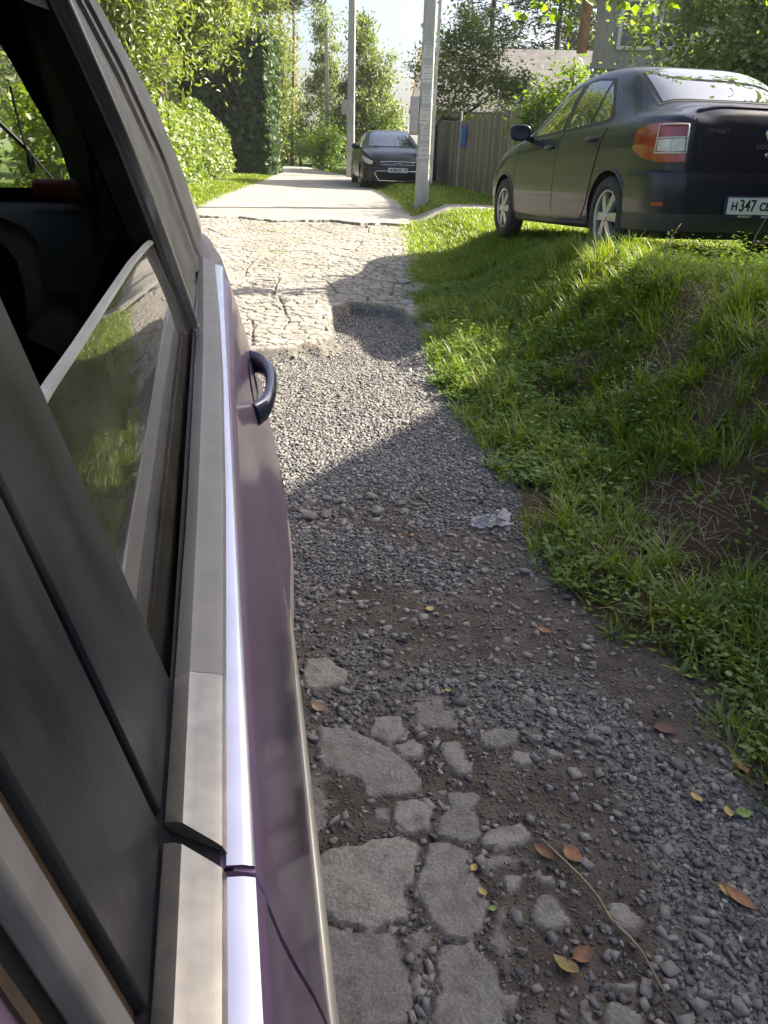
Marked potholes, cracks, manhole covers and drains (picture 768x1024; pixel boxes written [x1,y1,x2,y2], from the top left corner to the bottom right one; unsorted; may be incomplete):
pothole [258,301,421,383]
crack [301,686,669,1024]
crack [200,216,435,348]
